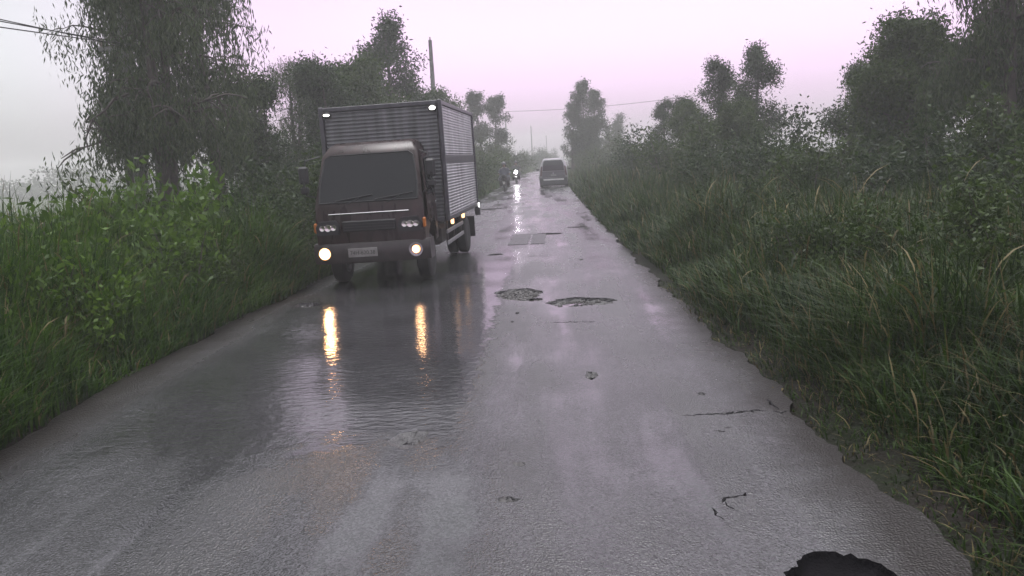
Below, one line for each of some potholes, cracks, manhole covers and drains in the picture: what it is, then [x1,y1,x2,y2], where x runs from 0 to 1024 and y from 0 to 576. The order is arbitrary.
pothole [546,297,618,307]
crack [712,492,750,520]
pothole [387,430,429,449]
pothole [783,551,897,576]
crack [683,399,786,432]
pothole [494,288,543,301]
